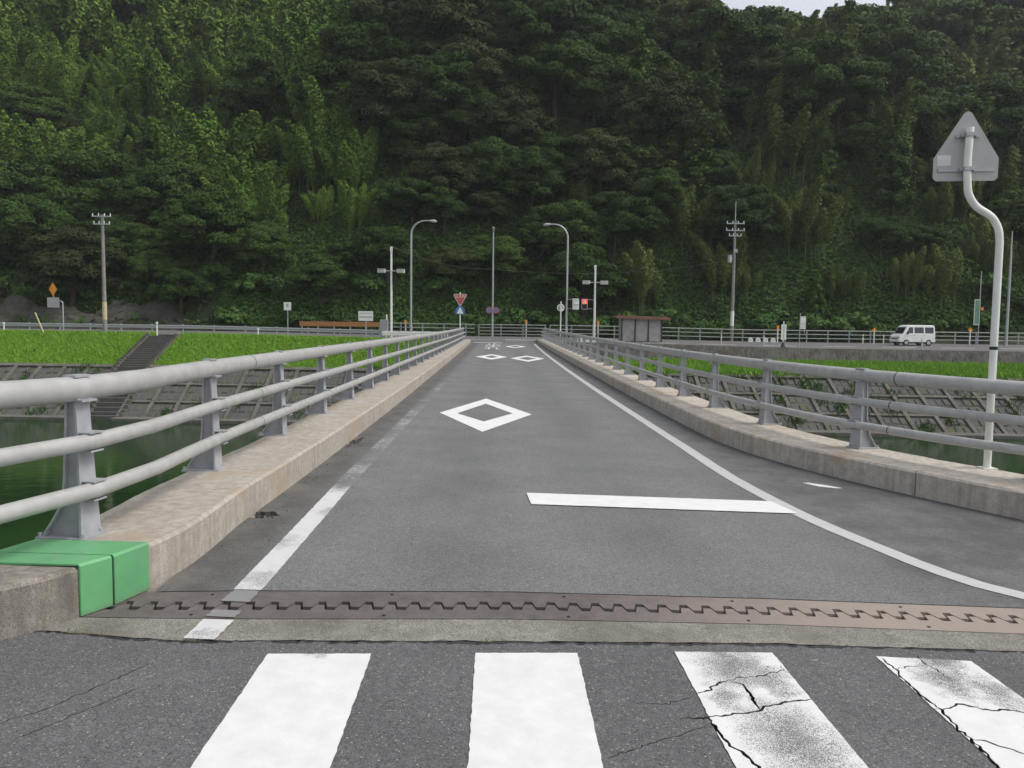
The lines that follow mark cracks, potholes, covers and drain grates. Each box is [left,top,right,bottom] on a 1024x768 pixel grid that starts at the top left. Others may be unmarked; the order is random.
pothole [251,511,281,519]
crack [0,664,148,740]
crack [607,672,808,768]
crack [884,655,1019,768]
